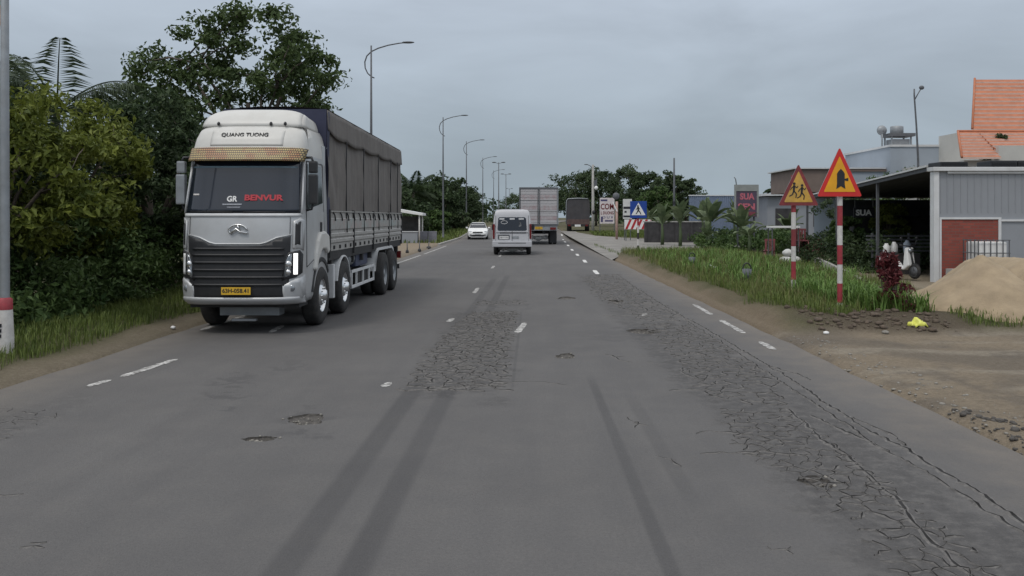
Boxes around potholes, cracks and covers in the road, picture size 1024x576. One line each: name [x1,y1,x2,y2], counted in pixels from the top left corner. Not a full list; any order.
crack [0,408,57,439]
crack [20,541,47,549]
crack [586,274,1024,576]
crack [395,300,565,392]
pothole [282,414,324,425]
